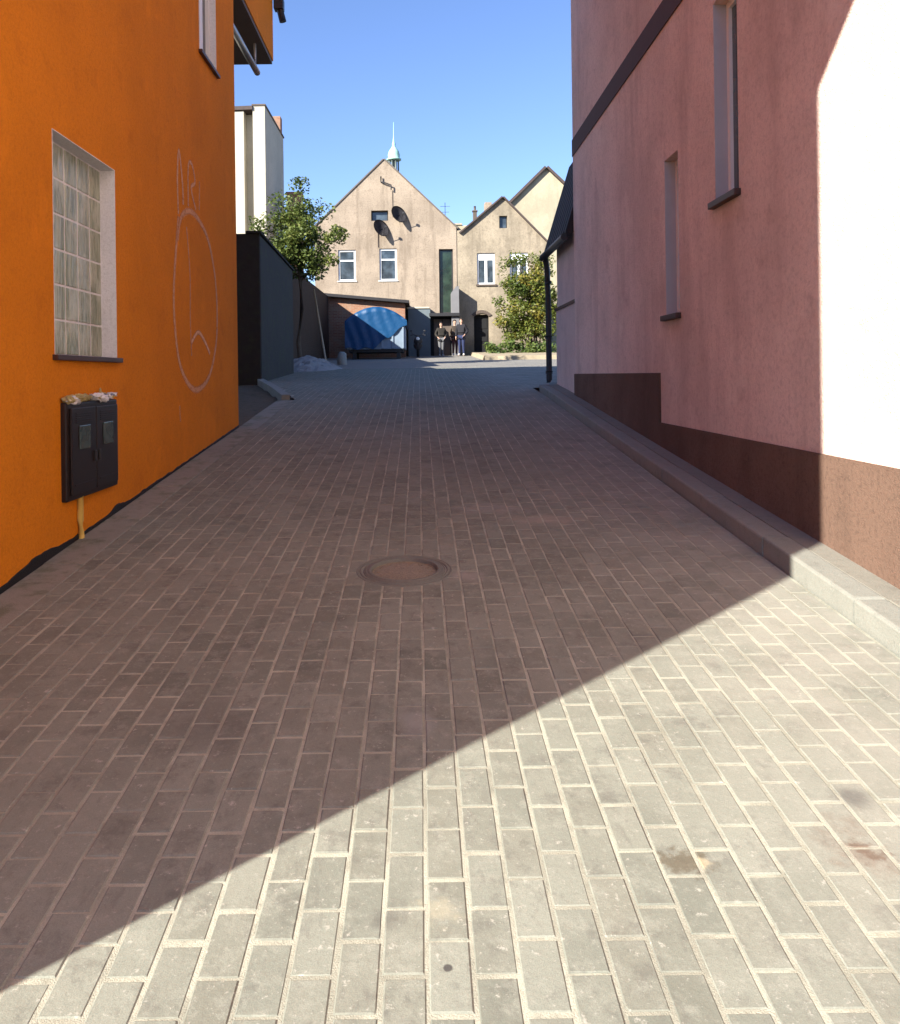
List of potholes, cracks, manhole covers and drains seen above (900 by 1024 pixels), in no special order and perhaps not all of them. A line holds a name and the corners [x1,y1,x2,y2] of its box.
manhole cover [356,555,452,587]
